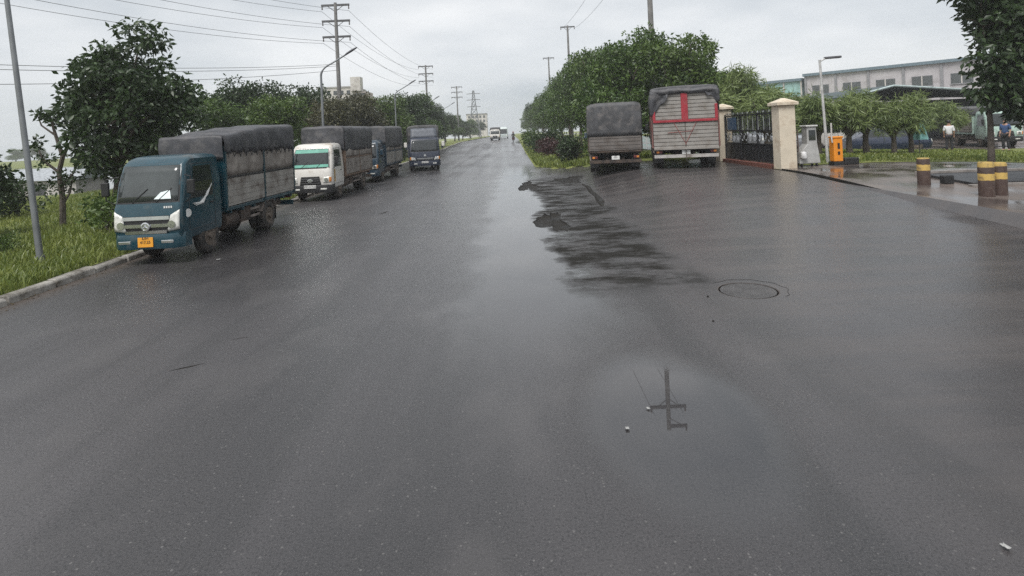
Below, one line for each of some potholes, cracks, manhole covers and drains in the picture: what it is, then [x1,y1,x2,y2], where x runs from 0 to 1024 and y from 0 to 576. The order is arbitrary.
manhole cover [714,279,790,299]
